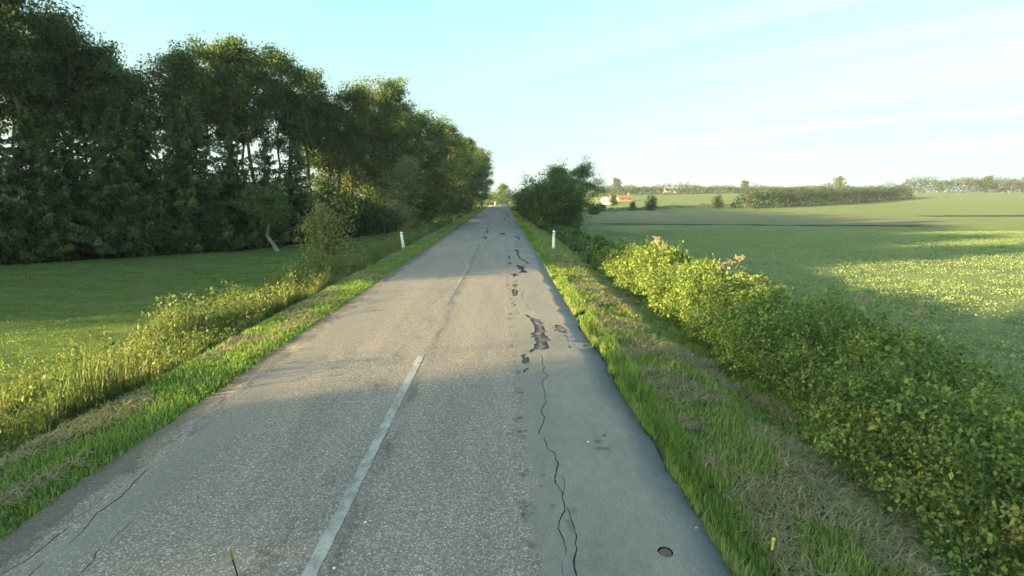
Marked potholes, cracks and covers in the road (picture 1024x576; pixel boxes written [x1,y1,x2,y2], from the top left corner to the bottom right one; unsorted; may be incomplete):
pothole [525,315,551,353]
manhole cover [658,547,673,557]
crack [538,355,577,576]
crack [0,465,155,576]
